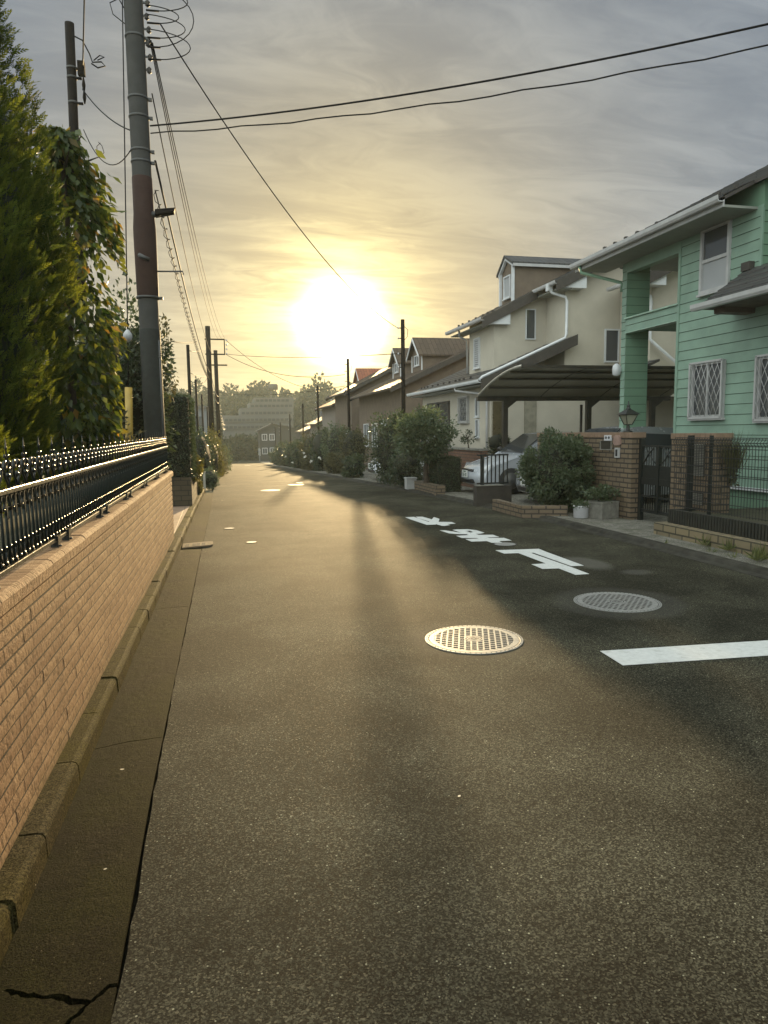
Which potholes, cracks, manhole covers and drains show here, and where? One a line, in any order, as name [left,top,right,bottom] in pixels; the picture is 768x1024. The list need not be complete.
manhole cover [425,625,523,654]
manhole cover [573,592,662,613]
